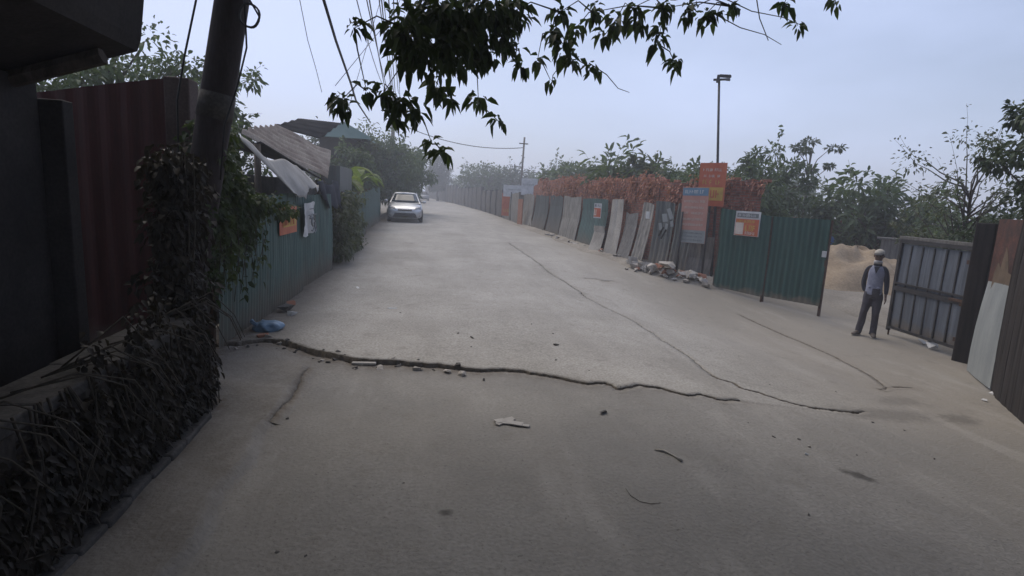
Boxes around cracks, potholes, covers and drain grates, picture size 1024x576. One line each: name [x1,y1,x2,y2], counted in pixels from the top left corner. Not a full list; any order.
crack [216,243,916,425]
